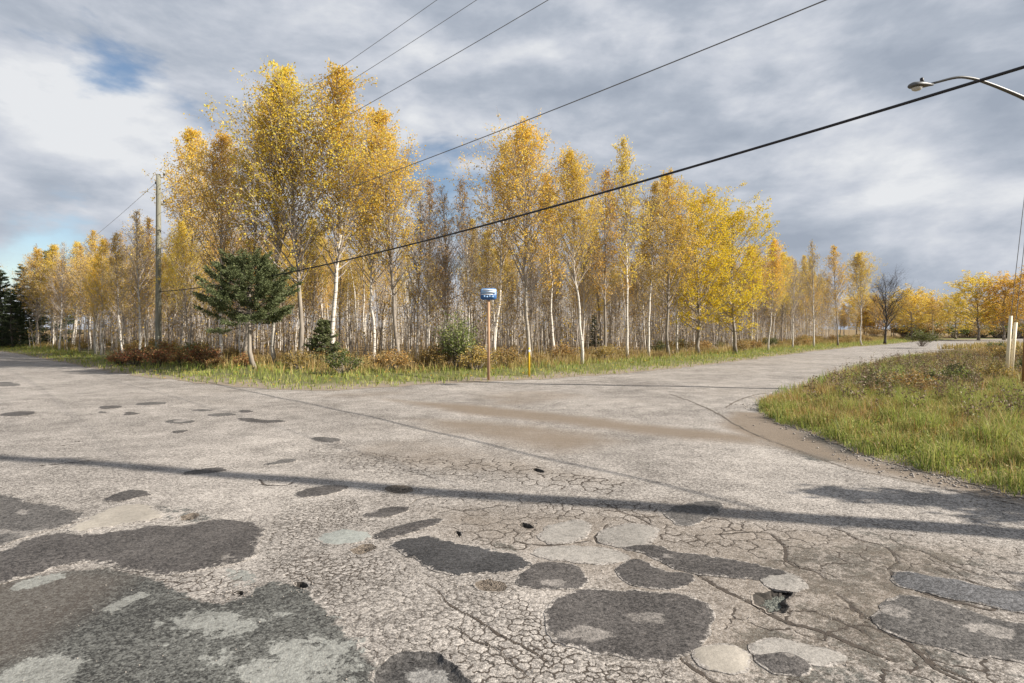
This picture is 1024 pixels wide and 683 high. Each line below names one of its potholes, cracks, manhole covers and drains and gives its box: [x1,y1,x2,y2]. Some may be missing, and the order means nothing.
crack [304,442,1020,683]
pothole [750,587,795,615]
